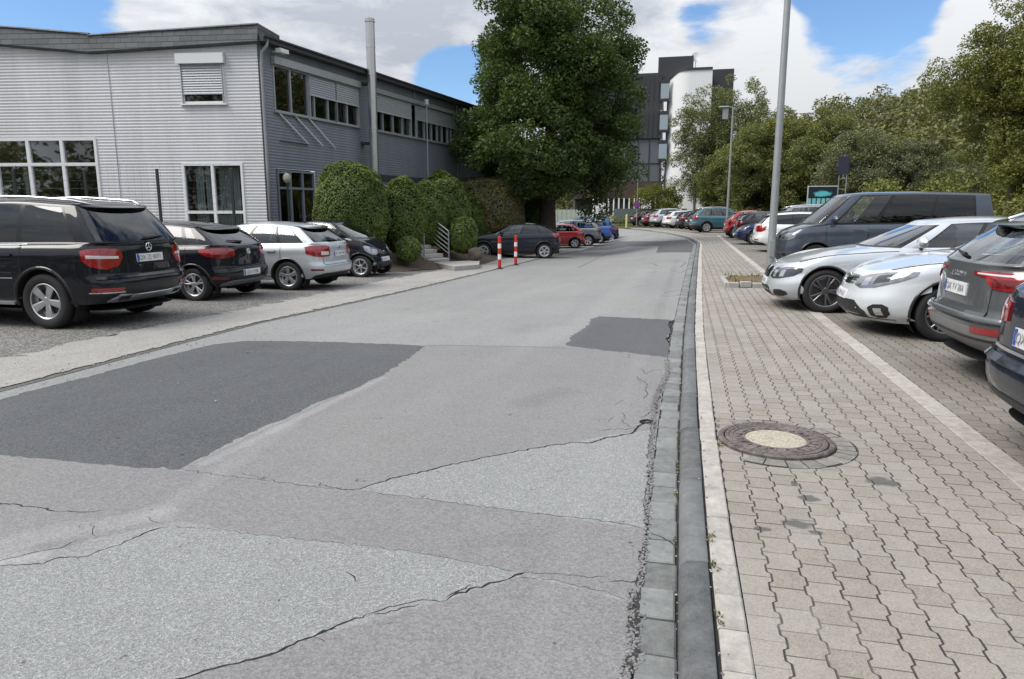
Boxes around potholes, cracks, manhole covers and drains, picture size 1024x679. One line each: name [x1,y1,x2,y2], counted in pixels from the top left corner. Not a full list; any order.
crack [0,355,677,679]
manhole cover [718,422,836,461]
